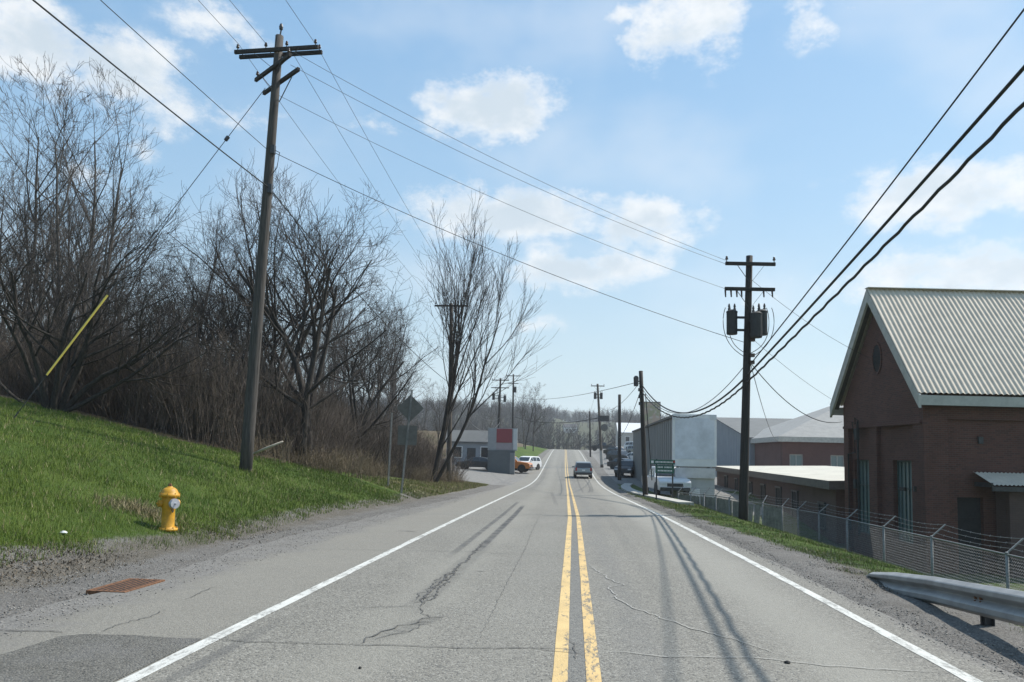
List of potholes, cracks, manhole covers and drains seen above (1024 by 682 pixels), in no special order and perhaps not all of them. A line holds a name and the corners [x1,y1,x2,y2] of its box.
crack [590,560,783,655]
crack [209,541,586,657]
drain grate [86,578,165,595]
